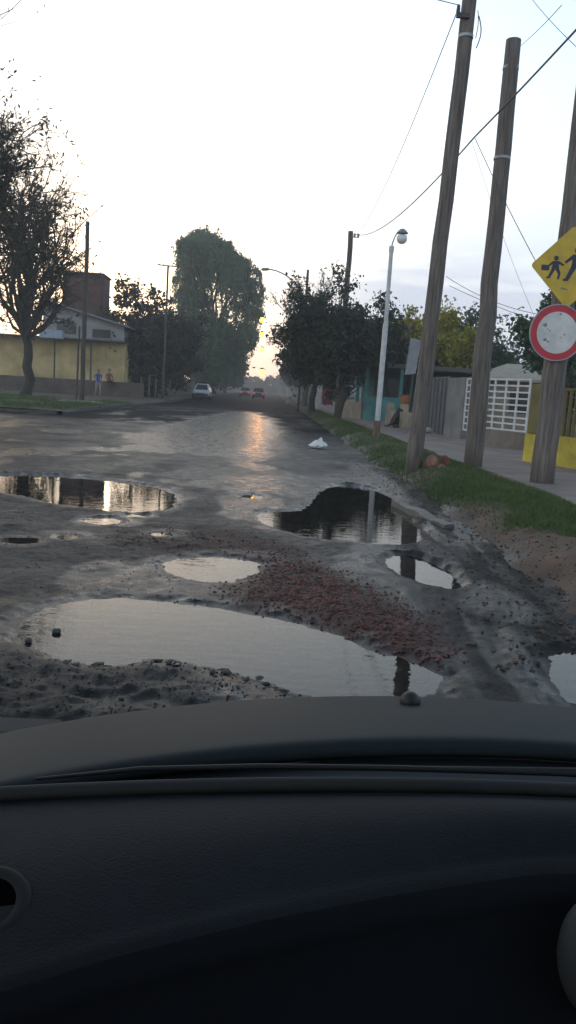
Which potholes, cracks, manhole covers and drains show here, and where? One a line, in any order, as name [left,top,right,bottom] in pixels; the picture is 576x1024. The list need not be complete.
pothole [147,553,270,585]
pothole [248,482,432,545]
pothole [0,594,461,698]
pothole [374,549,473,589]
pothole [526,643,576,706]
pothole [0,535,51,545]
pothole [48,532,86,541]
pothole [0,471,183,512]
